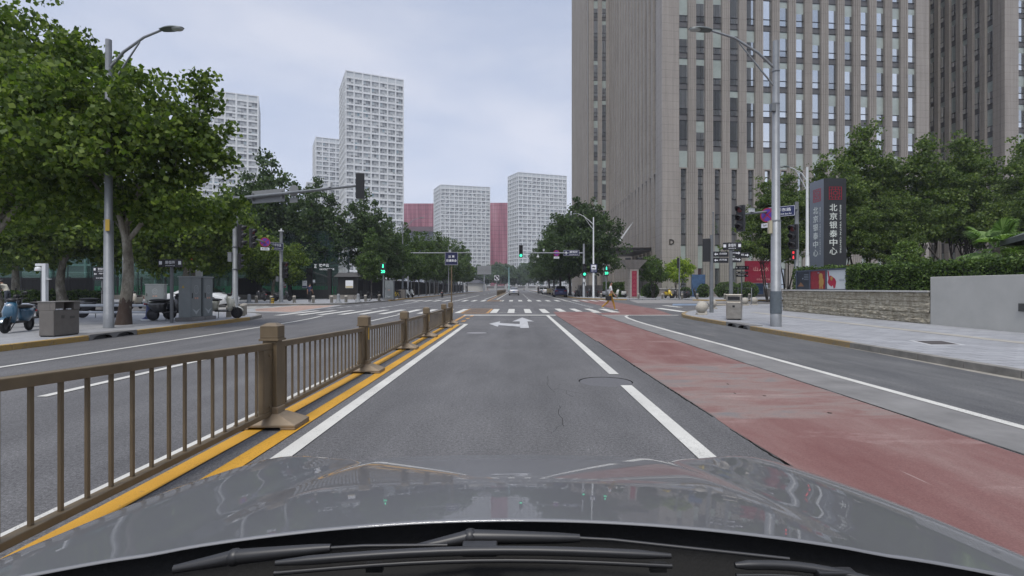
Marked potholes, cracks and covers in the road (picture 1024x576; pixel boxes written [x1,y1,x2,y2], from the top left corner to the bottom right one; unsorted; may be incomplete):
manhole cover [579,377,633,387]
